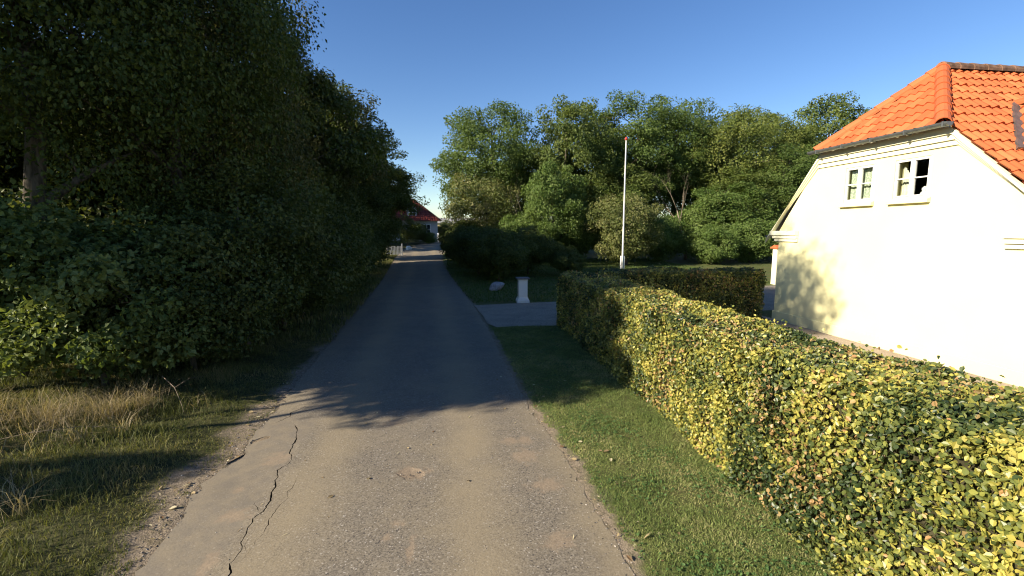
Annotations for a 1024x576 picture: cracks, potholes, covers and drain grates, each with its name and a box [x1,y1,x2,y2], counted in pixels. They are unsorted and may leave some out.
crack [228,407,314,576]
pothole [395,468,425,479]
